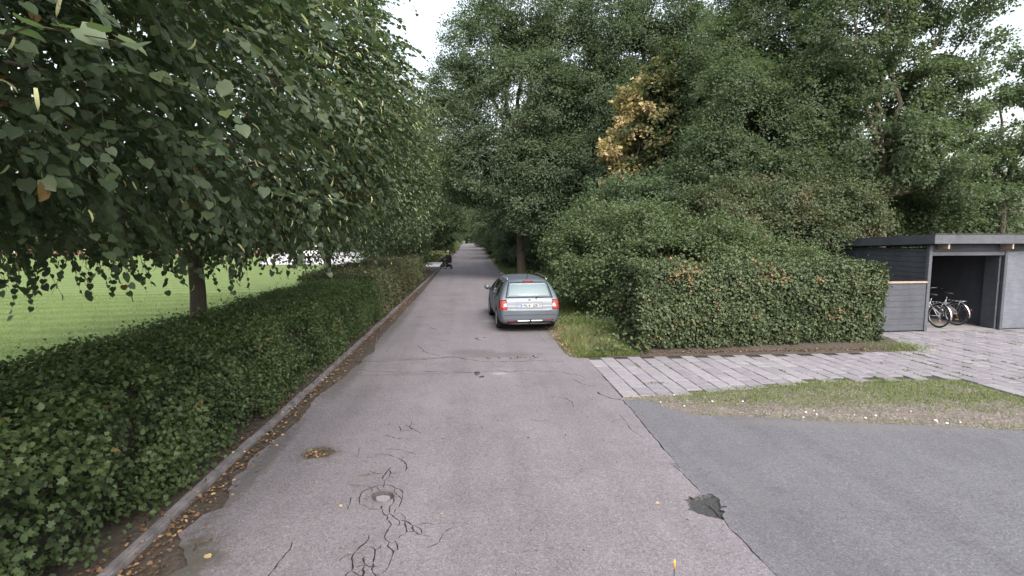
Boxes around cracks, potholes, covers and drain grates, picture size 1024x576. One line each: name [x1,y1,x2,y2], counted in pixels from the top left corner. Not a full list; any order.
pothole [302,447,336,459]
pothole [683,493,727,519]
crack [339,422,451,576]
